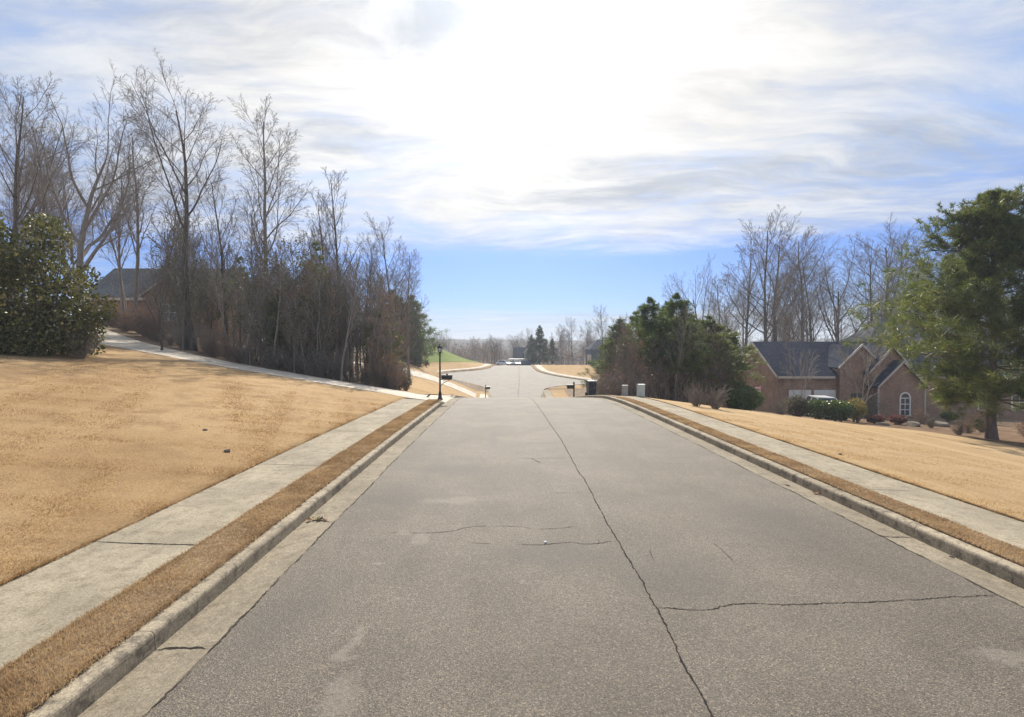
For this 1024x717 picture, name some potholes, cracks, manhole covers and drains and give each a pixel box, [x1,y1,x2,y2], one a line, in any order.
crack [393,397,992,717]
